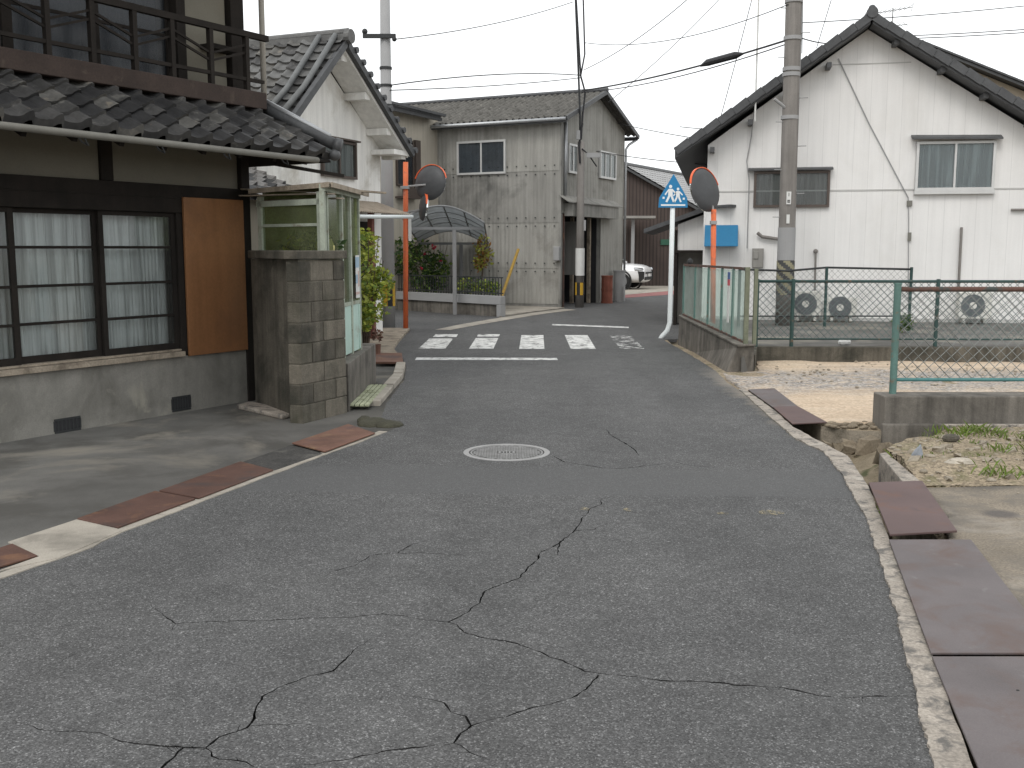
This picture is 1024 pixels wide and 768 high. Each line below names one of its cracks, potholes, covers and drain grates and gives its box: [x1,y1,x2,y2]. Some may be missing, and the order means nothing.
manhole cover [463,444,550,461]
crack [21,641,367,768]
crack [160,498,880,767]
